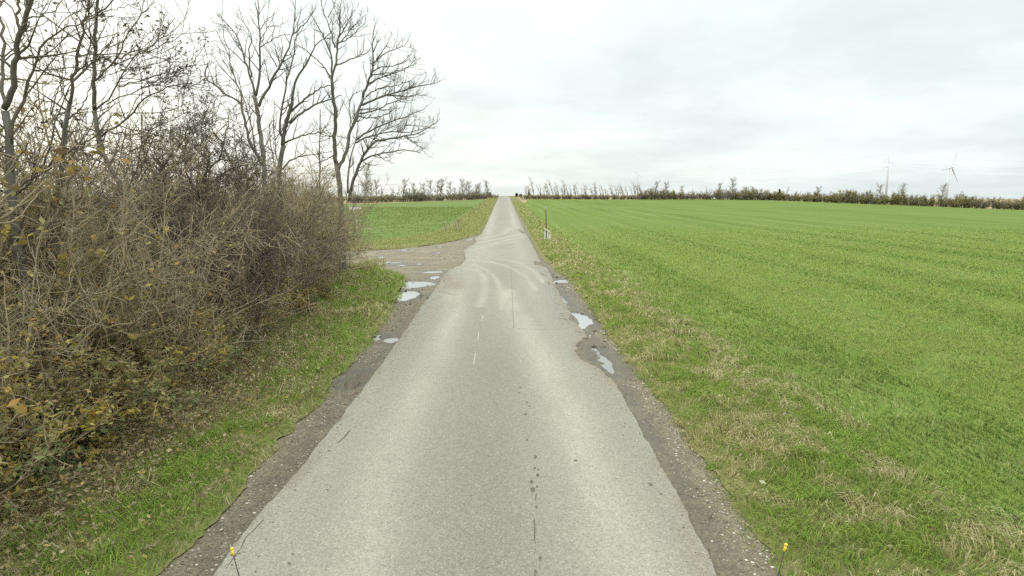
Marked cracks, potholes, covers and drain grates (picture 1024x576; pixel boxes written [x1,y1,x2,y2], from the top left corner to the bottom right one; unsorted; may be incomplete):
pothole [575,338,612,378]
